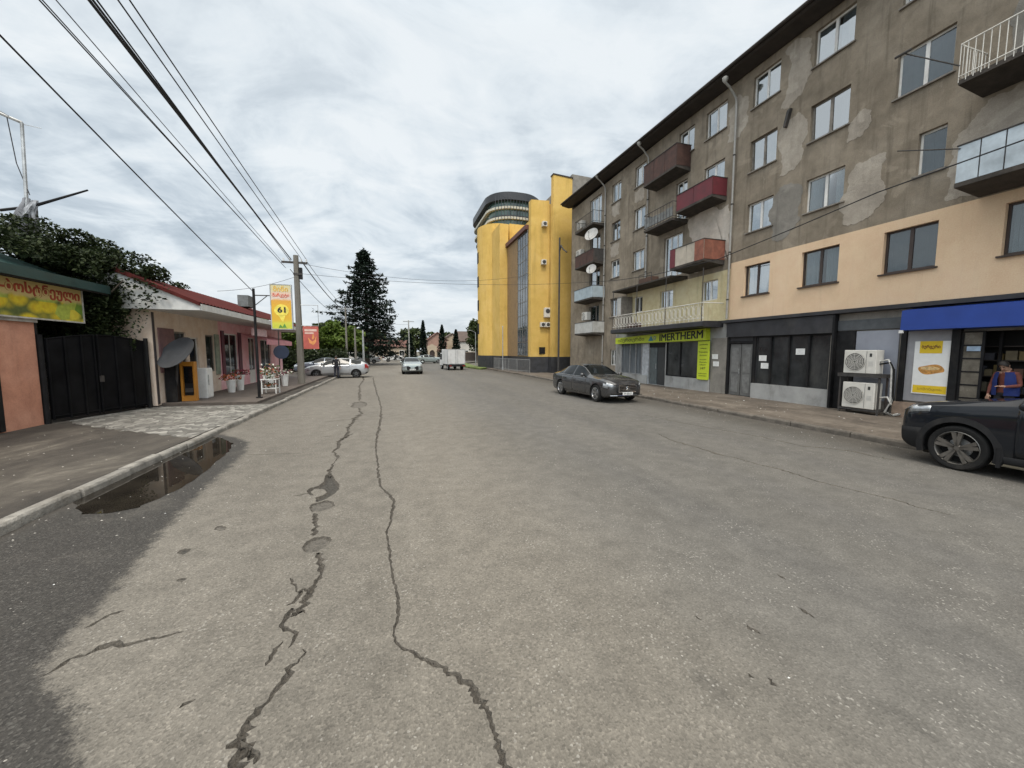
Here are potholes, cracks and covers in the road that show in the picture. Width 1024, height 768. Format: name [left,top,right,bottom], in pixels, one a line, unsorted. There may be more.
pothole [307,473,340,502]
crack [225,376,513,768]
pothole [302,536,332,553]
crack [43,610,182,676]
